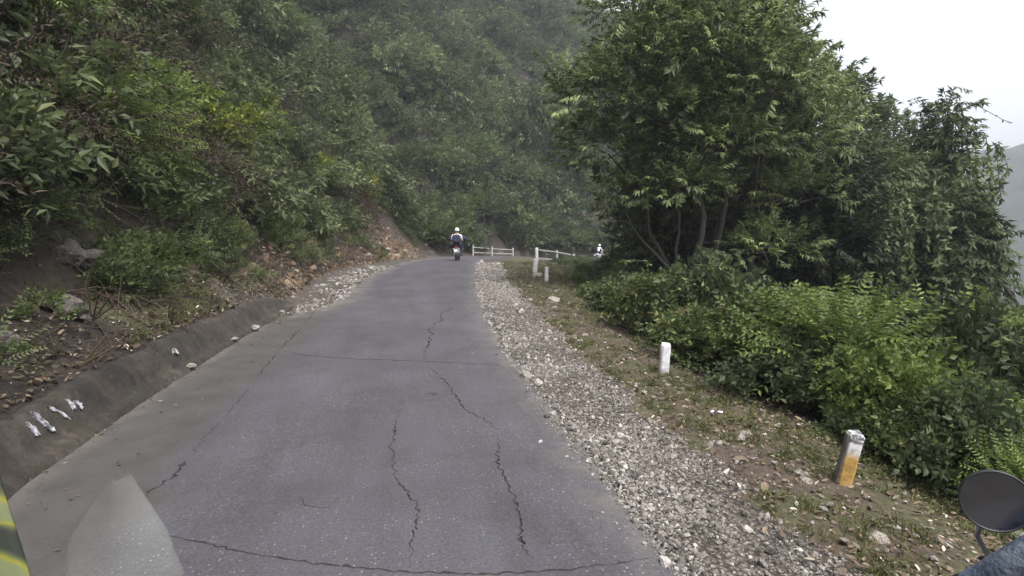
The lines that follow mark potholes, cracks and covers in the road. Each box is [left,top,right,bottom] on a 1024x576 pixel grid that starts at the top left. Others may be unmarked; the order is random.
crack [148,301,659,575]
